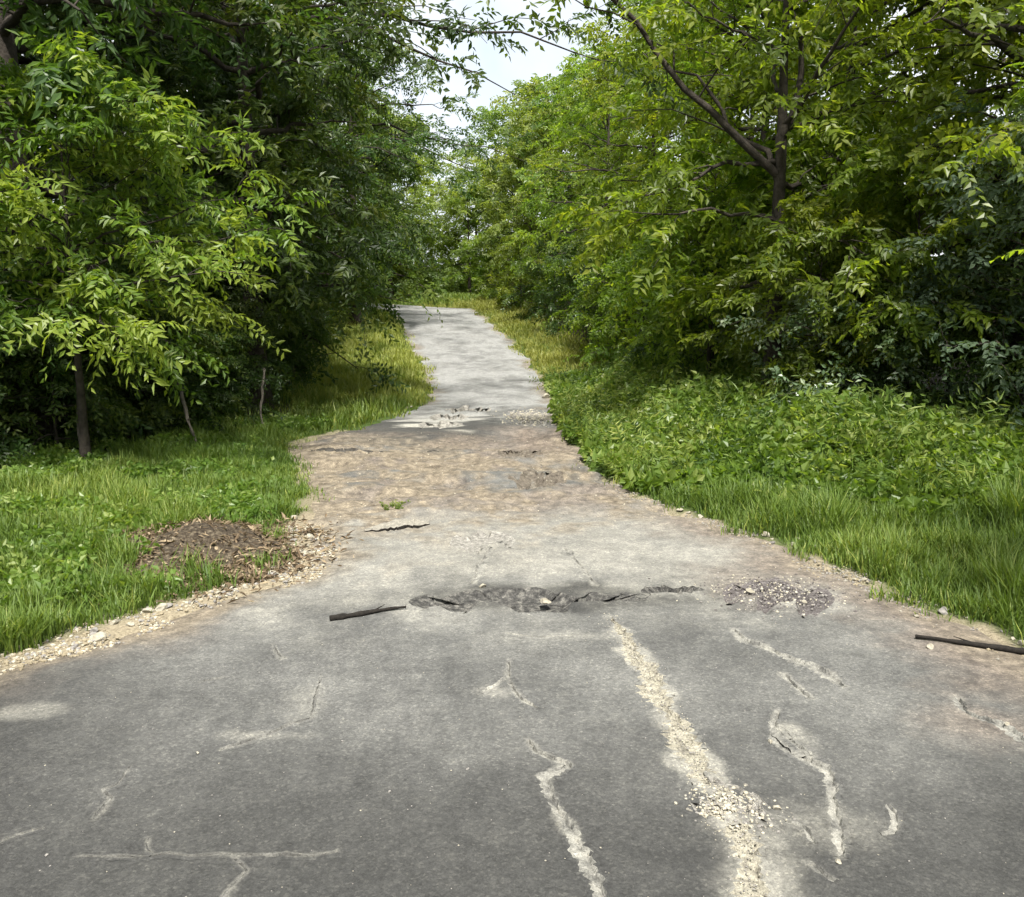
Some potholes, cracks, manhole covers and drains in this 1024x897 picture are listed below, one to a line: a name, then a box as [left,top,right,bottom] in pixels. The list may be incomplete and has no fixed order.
crack [78,837,338,897]
pothole [635,583,711,599]
pothole [426,413,474,423]
pothole [717,576,841,620]
pothole [441,405,495,414]
crack [521,615,853,897]
crack [202,643,326,752]
pothole [501,468,573,490]
